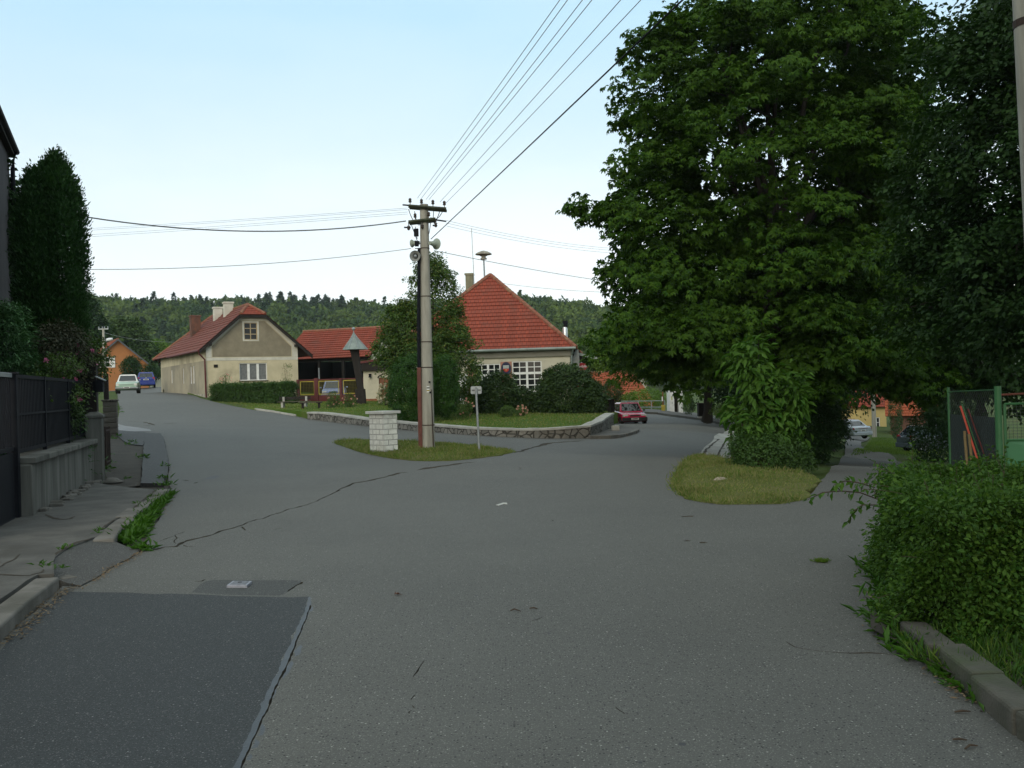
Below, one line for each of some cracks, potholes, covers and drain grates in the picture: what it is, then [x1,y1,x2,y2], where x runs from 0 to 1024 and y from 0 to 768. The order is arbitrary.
crack [513,441,576,453]
crack [787,642,890,655]
crack [153,462,472,550]
